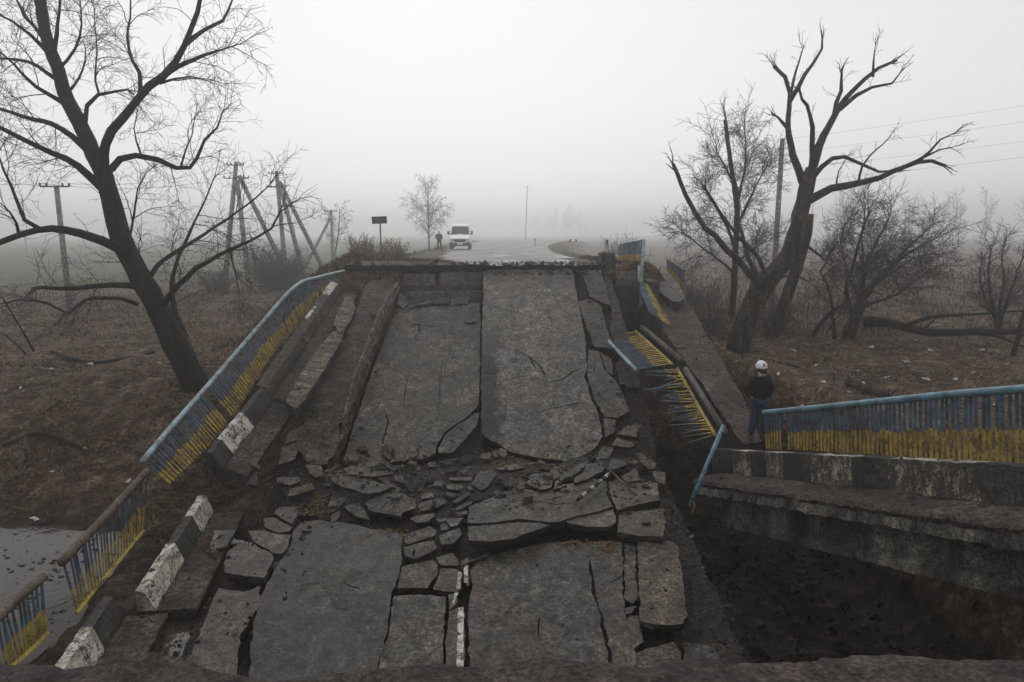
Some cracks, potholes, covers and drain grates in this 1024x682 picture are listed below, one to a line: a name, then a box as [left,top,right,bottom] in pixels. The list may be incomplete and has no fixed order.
crack [527,271,630,441]
crack [589,565,622,663]
crack [387,590,399,639]
